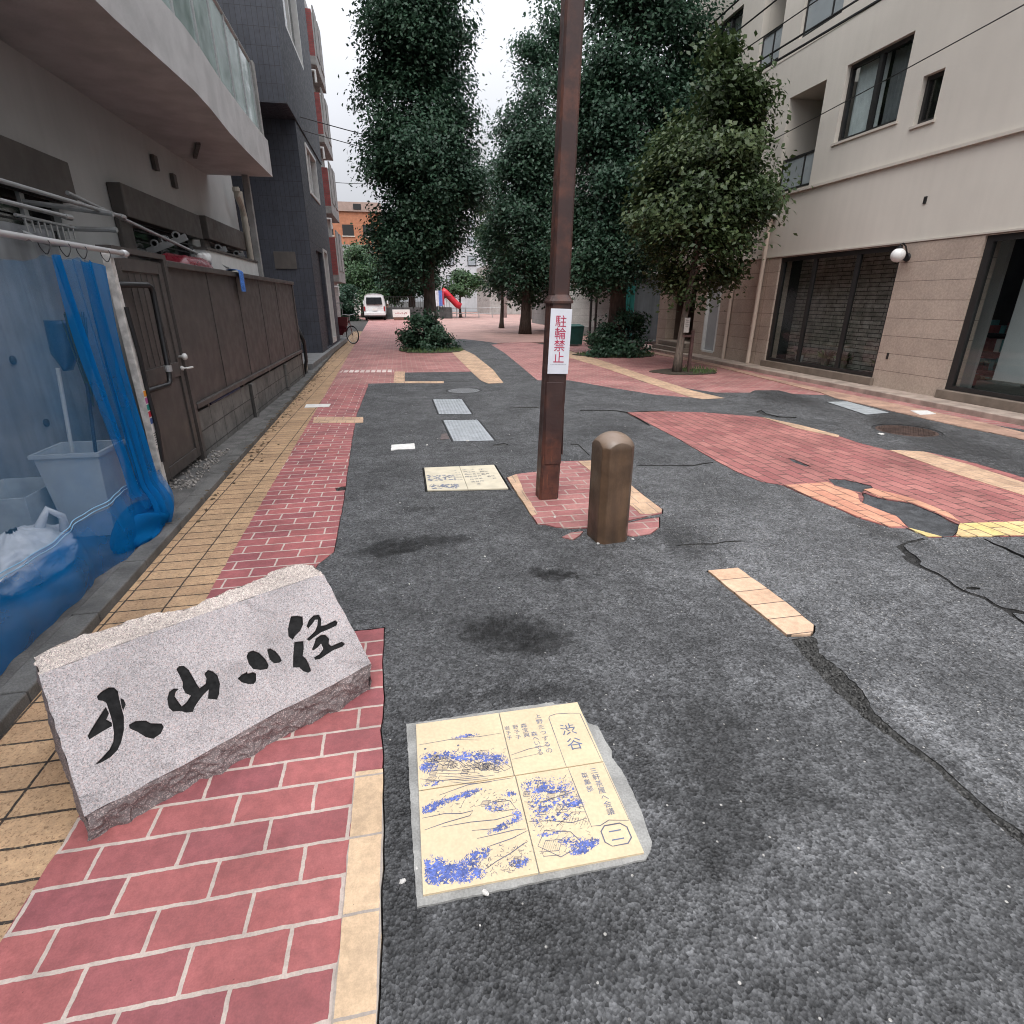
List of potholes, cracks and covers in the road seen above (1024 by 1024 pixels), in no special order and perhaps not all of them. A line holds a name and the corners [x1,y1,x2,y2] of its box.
crack [792,538,1024,846]
pothole [829,479,872,492]
crack [580,410,657,426]
pothole [862,494,959,536]
manhole cover [872,424,943,437]
crack [757,410,796,418]
